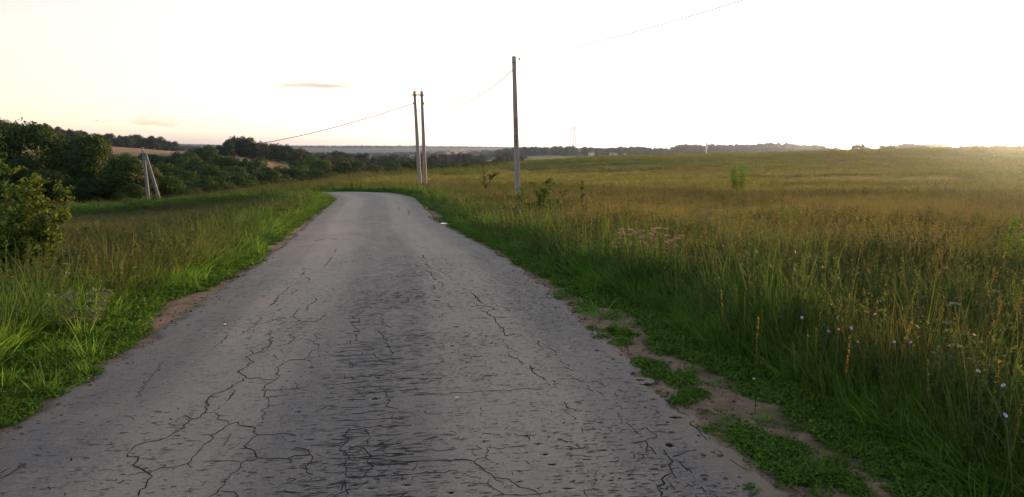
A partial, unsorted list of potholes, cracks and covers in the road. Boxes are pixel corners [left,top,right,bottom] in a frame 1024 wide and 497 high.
pothole [652,439,687,452]
crack [332,307,588,496]
crack [127,298,327,496]
crack [409,293,802,496]
